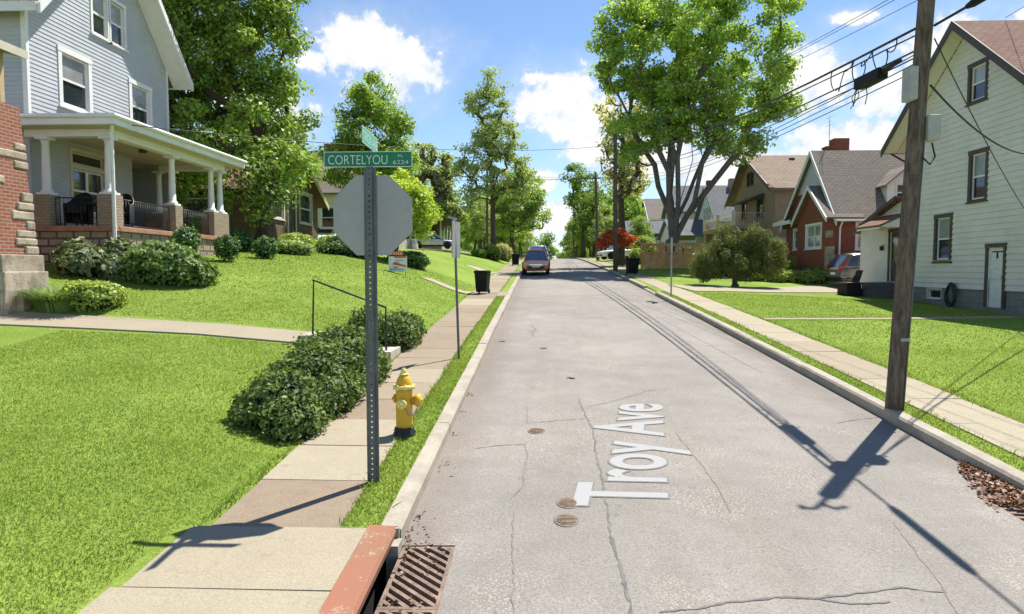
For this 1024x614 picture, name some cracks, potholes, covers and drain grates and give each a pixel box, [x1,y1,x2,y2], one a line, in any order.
crack [480,444,528,496]
drain grate [318,525,455,614]
manhole cover [557,497,578,509]
manhole cover [554,513,579,527]
crack [676,433,731,513]
crack [660,523,958,614]
